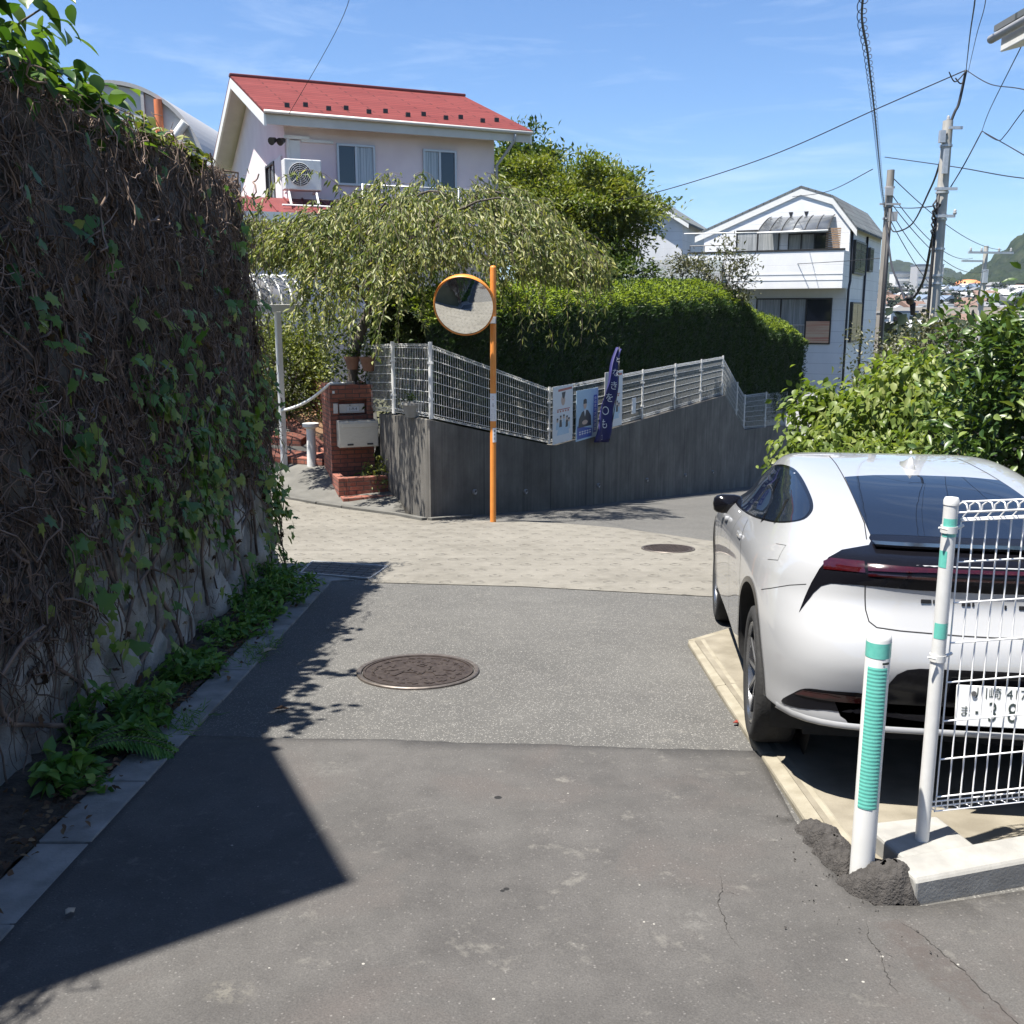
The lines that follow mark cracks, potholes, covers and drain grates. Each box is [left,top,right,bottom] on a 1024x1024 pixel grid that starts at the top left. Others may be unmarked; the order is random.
manhole cover [641,544,695,553]
manhole cover [356,653,479,690]
crack [904,924,1016,1022]
